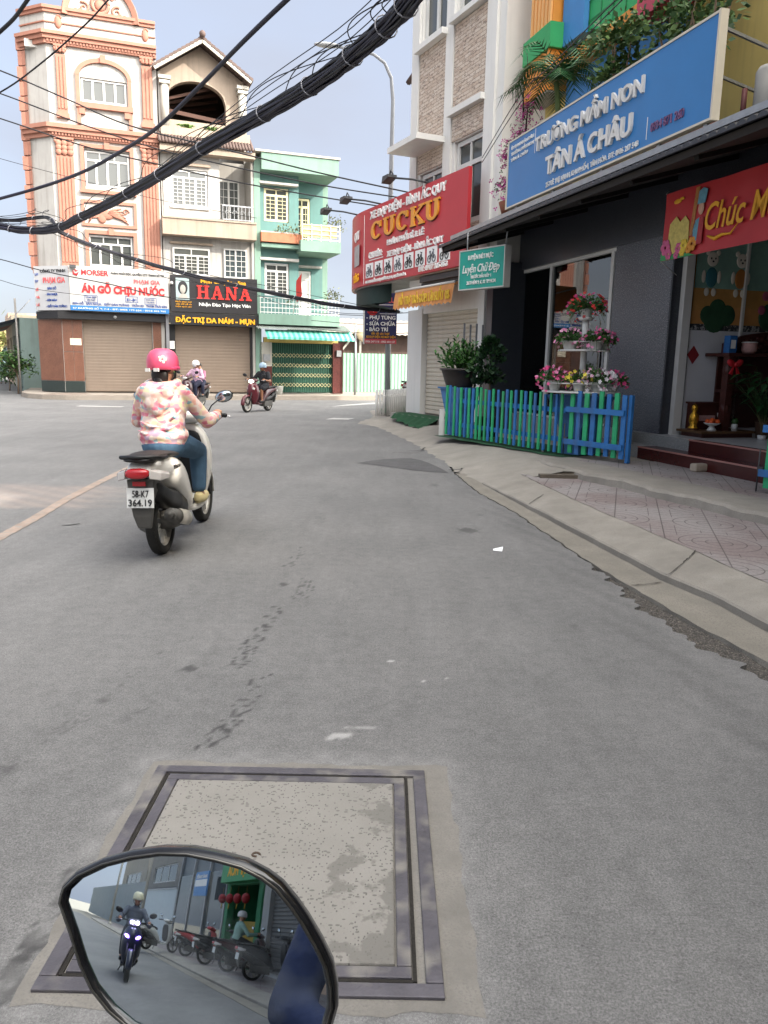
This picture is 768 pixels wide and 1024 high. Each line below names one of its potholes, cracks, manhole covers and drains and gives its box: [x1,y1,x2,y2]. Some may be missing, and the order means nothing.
manhole cover [9,760,486,1018]
